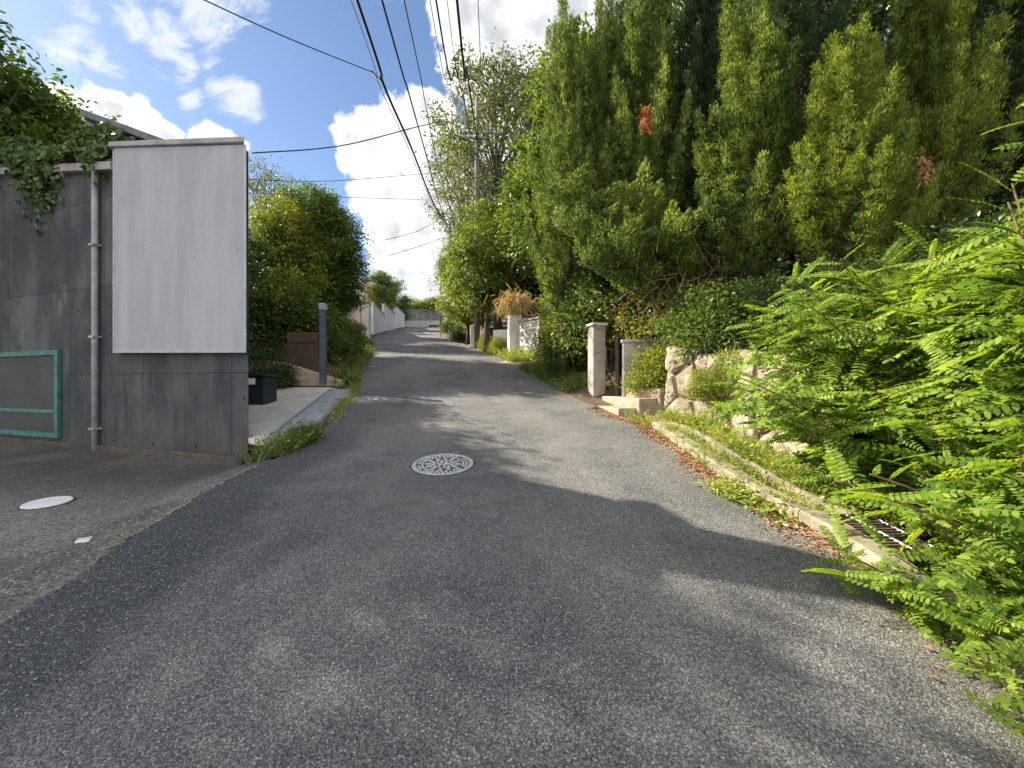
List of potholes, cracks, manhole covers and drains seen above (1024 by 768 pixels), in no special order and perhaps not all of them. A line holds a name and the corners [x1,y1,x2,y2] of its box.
manhole cover [16,496,76,511]
manhole cover [410,453,475,476]
drain grate [828,514,939,556]
